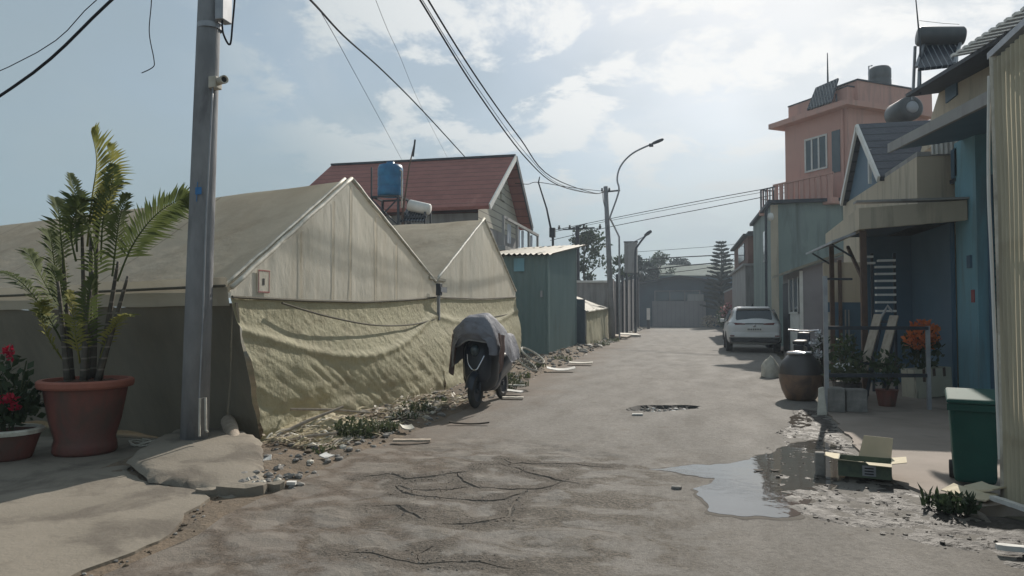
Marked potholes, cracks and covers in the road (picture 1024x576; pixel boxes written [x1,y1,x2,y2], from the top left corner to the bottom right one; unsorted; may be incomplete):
crack [367,459,608,525]
crack [352,546,509,569]
